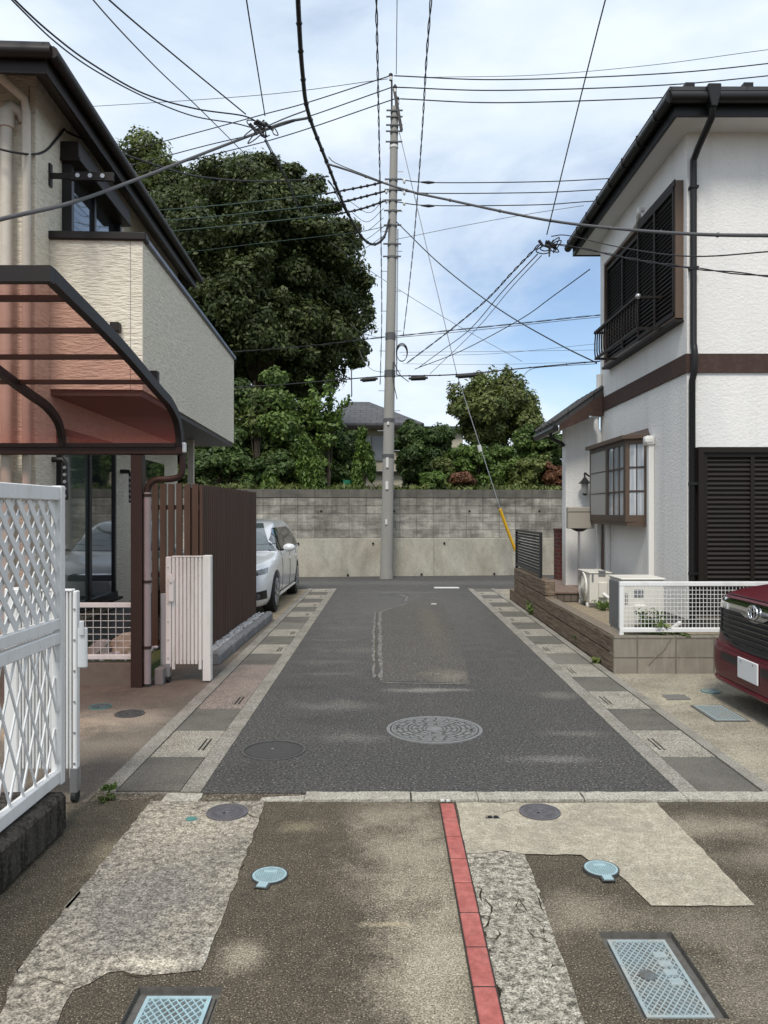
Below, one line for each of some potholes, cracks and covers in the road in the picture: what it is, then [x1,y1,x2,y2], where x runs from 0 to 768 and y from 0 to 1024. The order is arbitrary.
crack [516,893,551,943]
manhole cover [519,803,561,821]
crack [475,885,504,942]
manhole cover [206,803,248,821]
utility cover [251,866,288,889]
manhole cover [386,716,483,744]
manhole cover [241,740,306,761]
manhole cover [114,709,145,718]
utility cover [583,860,620,881]
